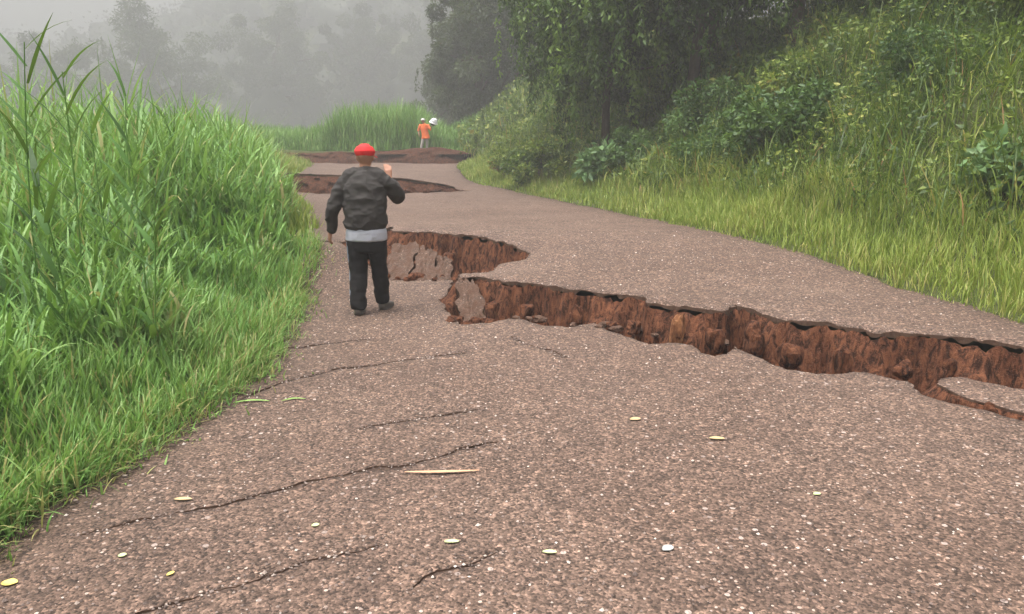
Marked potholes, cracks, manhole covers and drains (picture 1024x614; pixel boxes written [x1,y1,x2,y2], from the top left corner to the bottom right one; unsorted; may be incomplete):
crack [342,230,1024,424]
crack [415,564,474,587]
crack [278,451,456,492]
